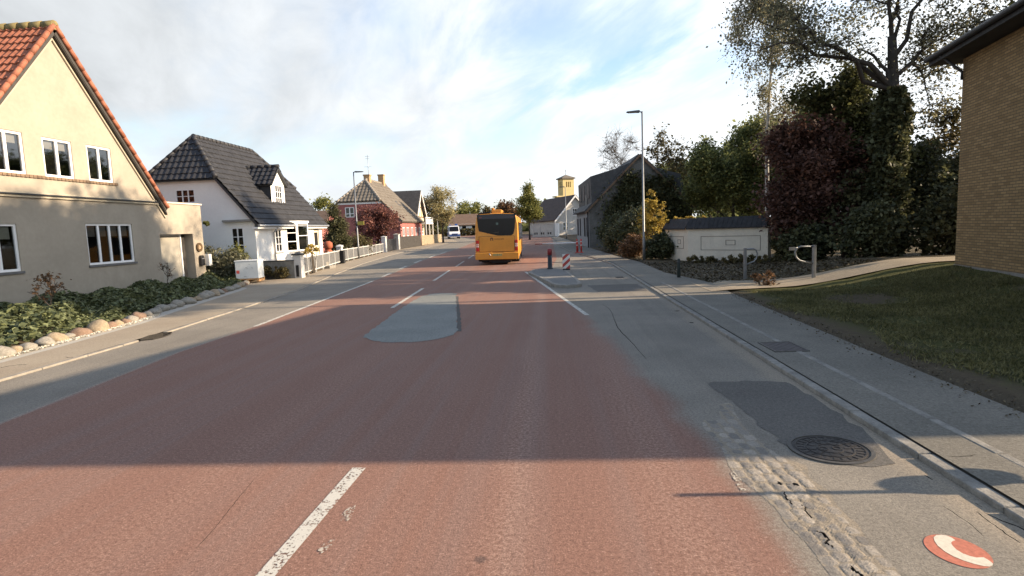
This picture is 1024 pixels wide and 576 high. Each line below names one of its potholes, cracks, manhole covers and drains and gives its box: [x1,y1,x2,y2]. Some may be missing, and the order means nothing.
manhole cover [787,434,876,465]
manhole cover [758,341,810,352]
